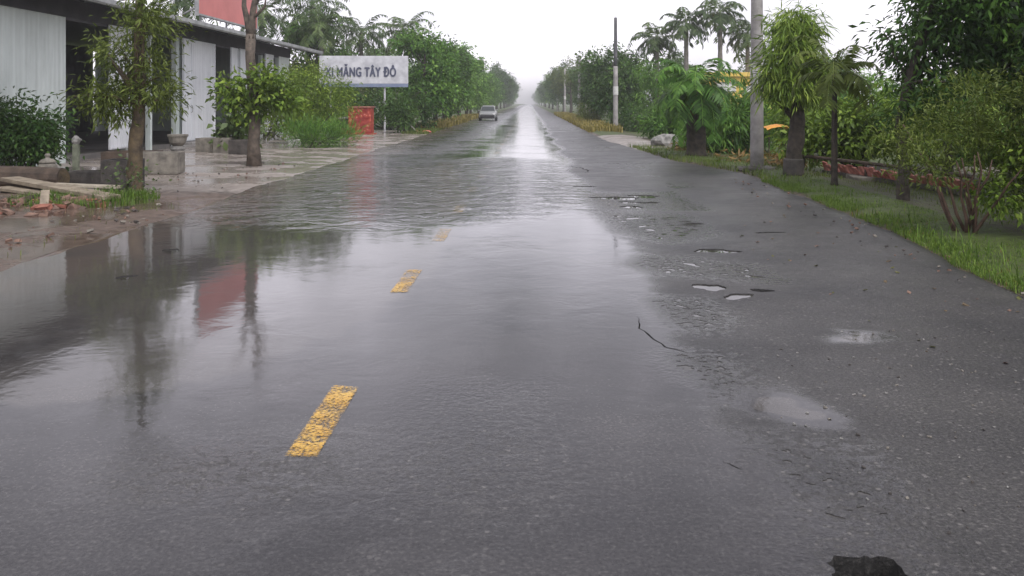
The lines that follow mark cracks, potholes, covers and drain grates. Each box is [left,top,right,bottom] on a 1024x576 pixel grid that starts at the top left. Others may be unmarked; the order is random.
pothole [827,555,908,576]
